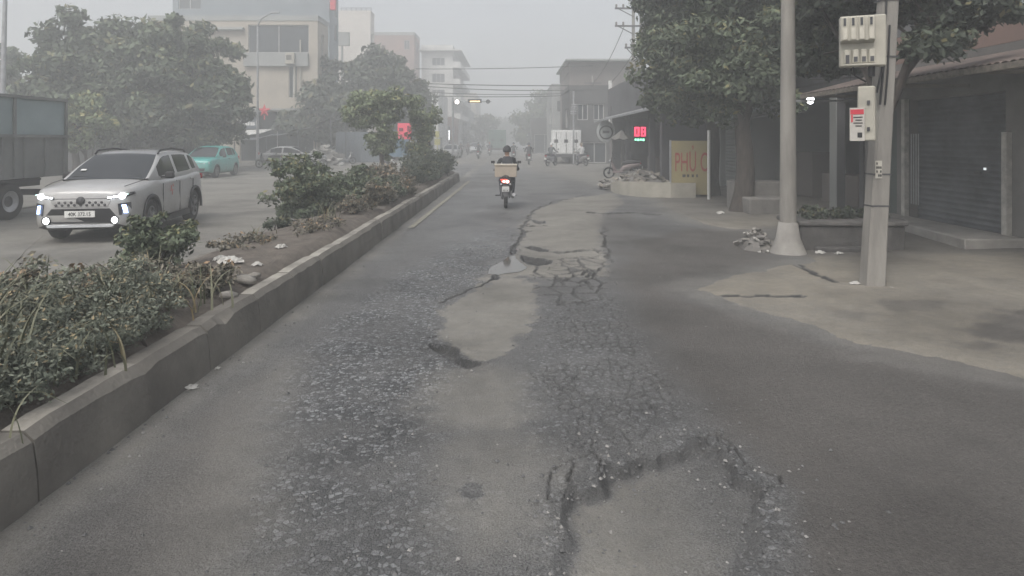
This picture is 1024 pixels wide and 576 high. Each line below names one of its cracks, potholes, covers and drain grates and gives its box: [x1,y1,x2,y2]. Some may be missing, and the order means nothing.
crack [509,194,785,503]
pothole [462,483,484,498]
pothole [551,438,768,576]
crack [440,279,492,303]
pothole [428,343,482,369]
